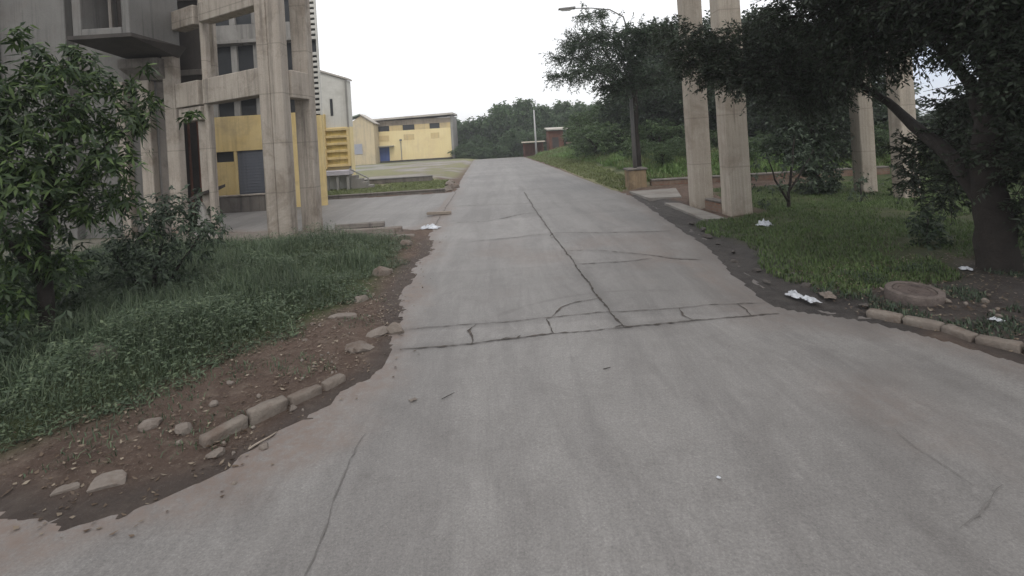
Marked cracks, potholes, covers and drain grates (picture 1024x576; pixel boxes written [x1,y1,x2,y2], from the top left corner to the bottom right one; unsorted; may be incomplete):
crack [304,433,366,576]
manhole cover [884,281,946,307]
crack [404,192,777,349]
crack [894,428,1002,528]
